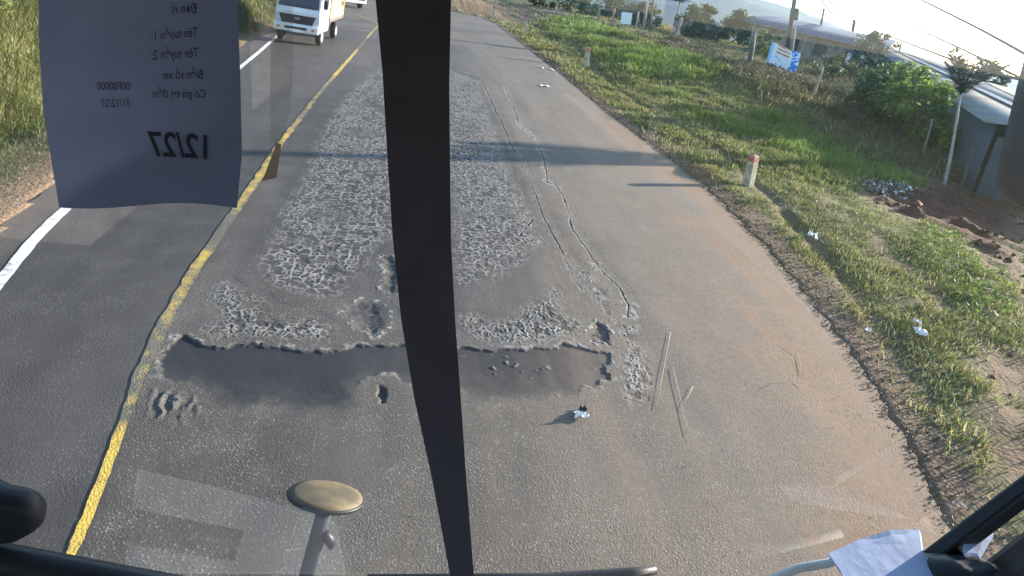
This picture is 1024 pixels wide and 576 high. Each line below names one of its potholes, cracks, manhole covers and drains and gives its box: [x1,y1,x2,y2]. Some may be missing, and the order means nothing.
pothole [329,294,398,345]
crack [184,67,393,351]
pothole [573,317,624,352]
crack [449,70,656,413]
pothole [362,375,402,414]
